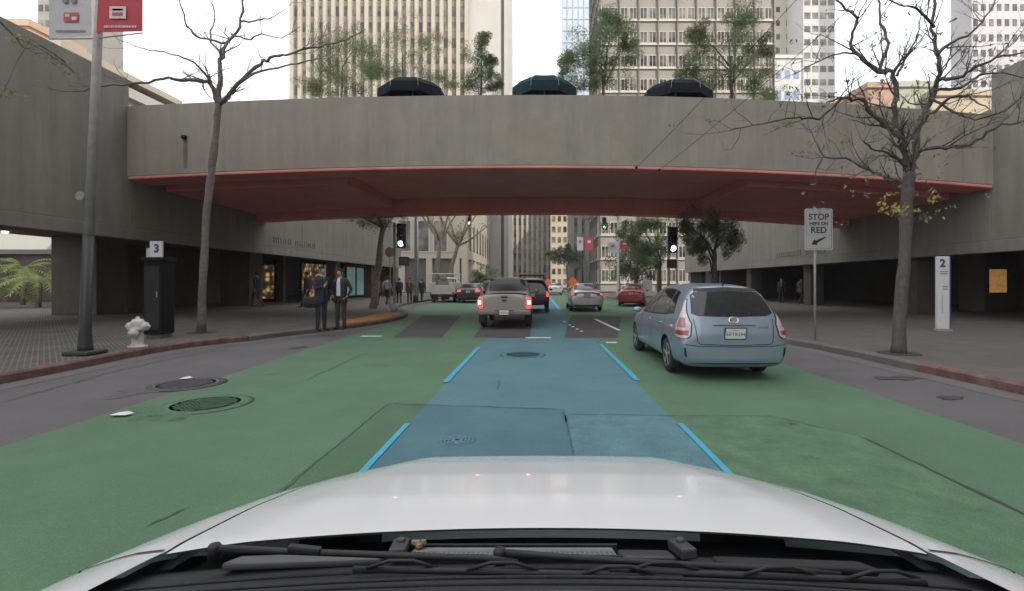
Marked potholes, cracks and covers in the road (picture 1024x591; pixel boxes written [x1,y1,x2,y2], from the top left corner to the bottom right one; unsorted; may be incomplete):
manhole cover [438,435,476,447]
manhole cover [145,377,228,392]
